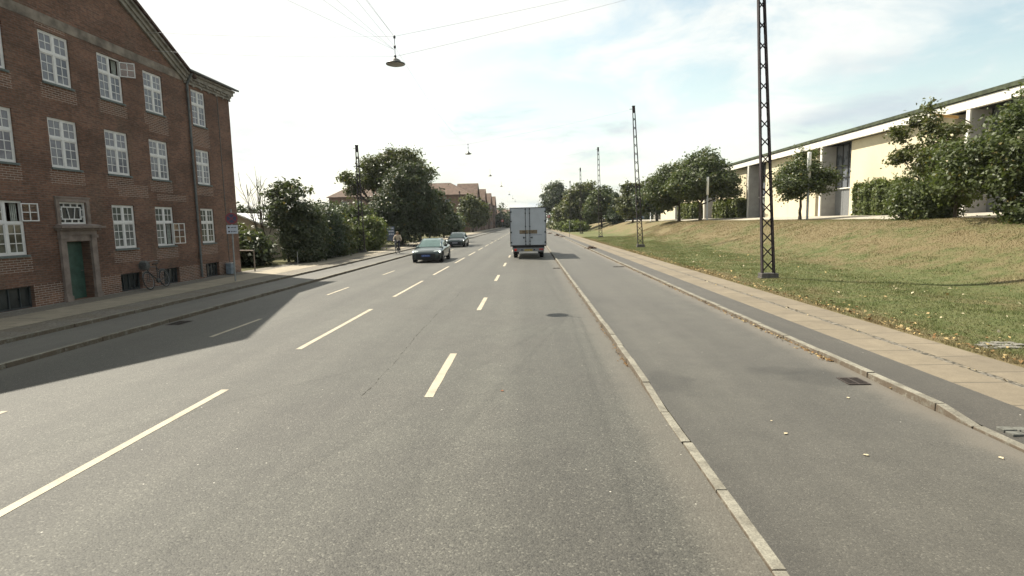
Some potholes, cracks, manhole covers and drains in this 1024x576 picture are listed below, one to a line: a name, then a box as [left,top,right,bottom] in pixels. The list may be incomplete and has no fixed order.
drain grate [836,377,871,385]
